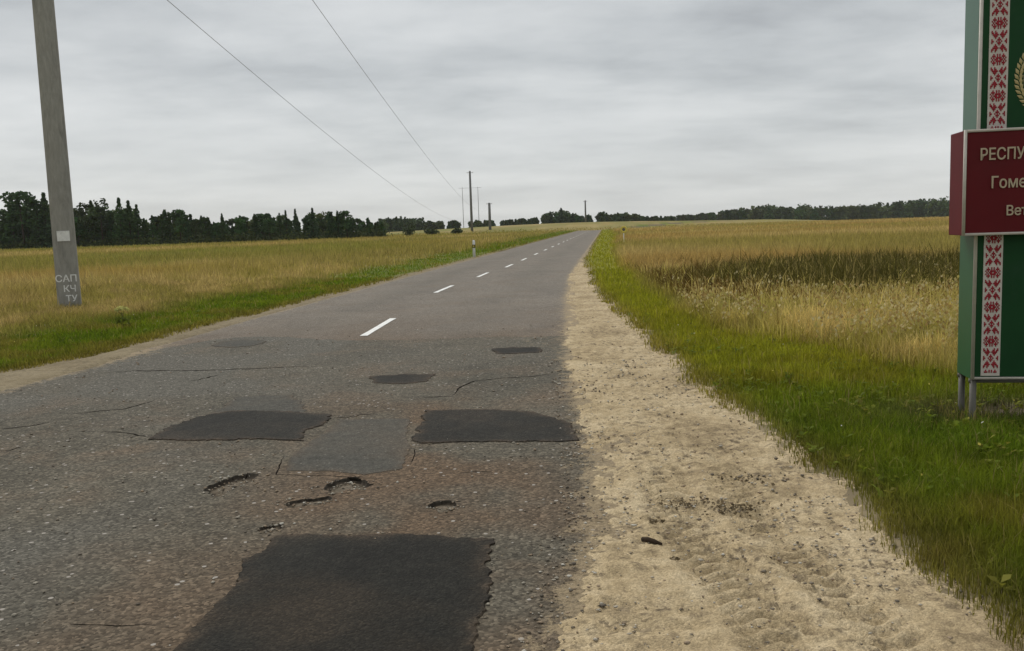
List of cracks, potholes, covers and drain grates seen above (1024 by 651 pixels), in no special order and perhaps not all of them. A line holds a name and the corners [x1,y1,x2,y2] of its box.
pothole [203,473,259,497]
pothole [324,477,373,495]
pothole [286,496,332,508]
pothole [257,524,286,534]
crack [106,367,285,382]
crack [437,373,558,397]
pothole [428,500,457,513]
